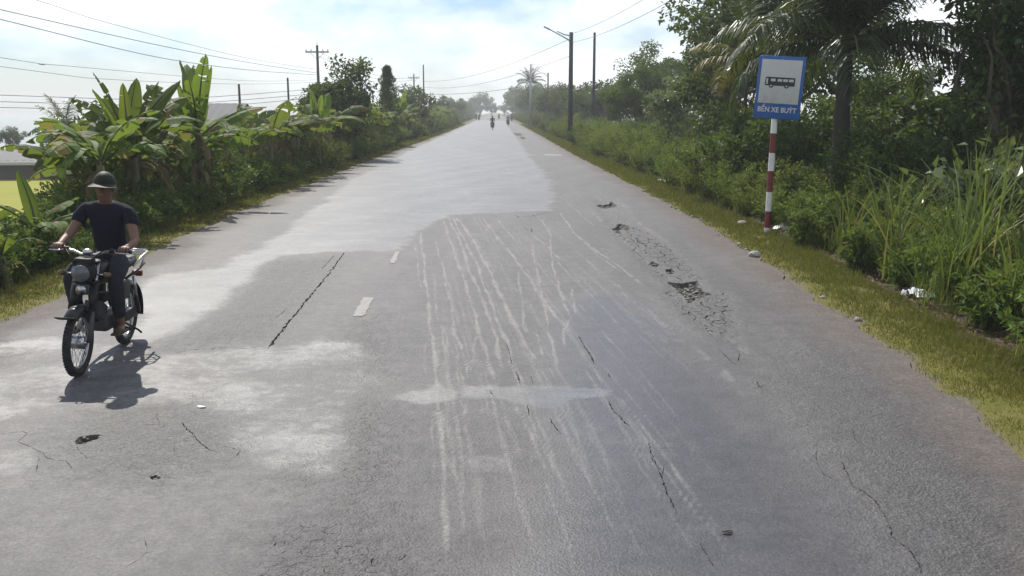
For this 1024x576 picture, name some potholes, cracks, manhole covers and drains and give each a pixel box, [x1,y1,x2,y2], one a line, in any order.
crack [648,444,677,514]
crack [151,411,240,459]
pothole [667,281,711,303]
crack [4,428,95,472]
crack [261,525,378,576]
crack [620,227,732,336]
pothole [74,434,102,444]
